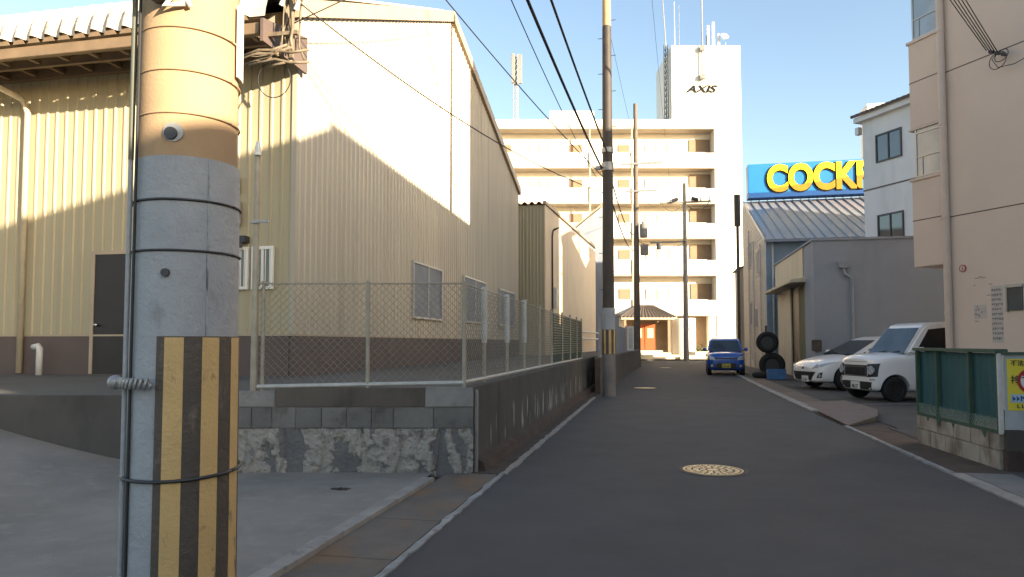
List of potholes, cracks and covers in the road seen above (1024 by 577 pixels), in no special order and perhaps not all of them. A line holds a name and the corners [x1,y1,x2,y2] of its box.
manhole cover [678,464,749,477]
